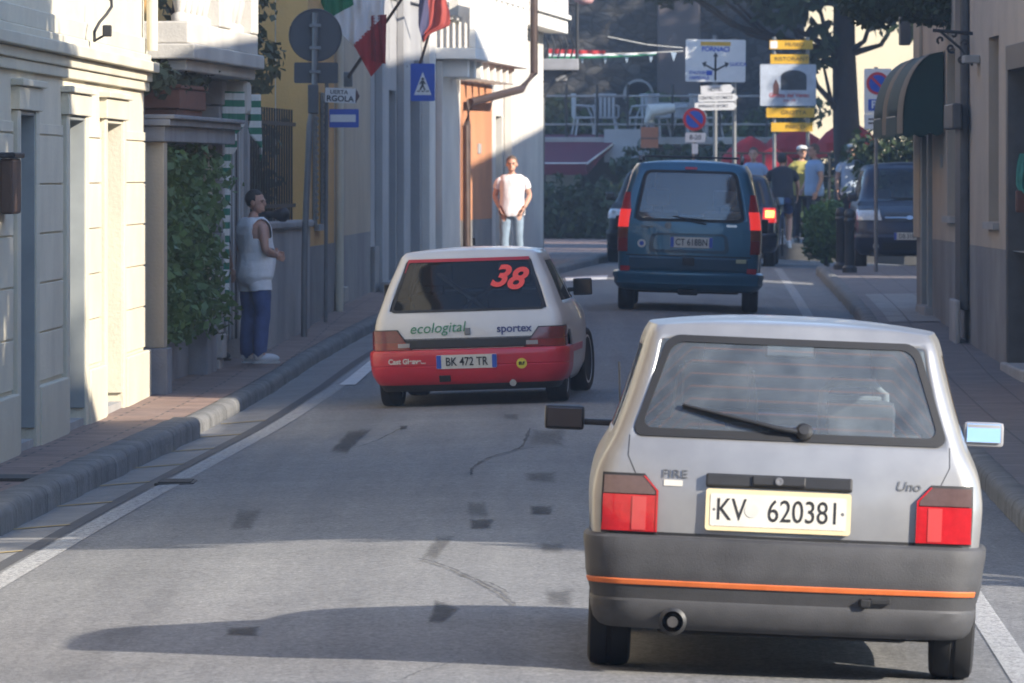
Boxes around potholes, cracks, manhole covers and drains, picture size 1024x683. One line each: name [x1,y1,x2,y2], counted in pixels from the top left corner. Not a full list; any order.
crack [419,558,515,604]
crack [470,430,534,475]
